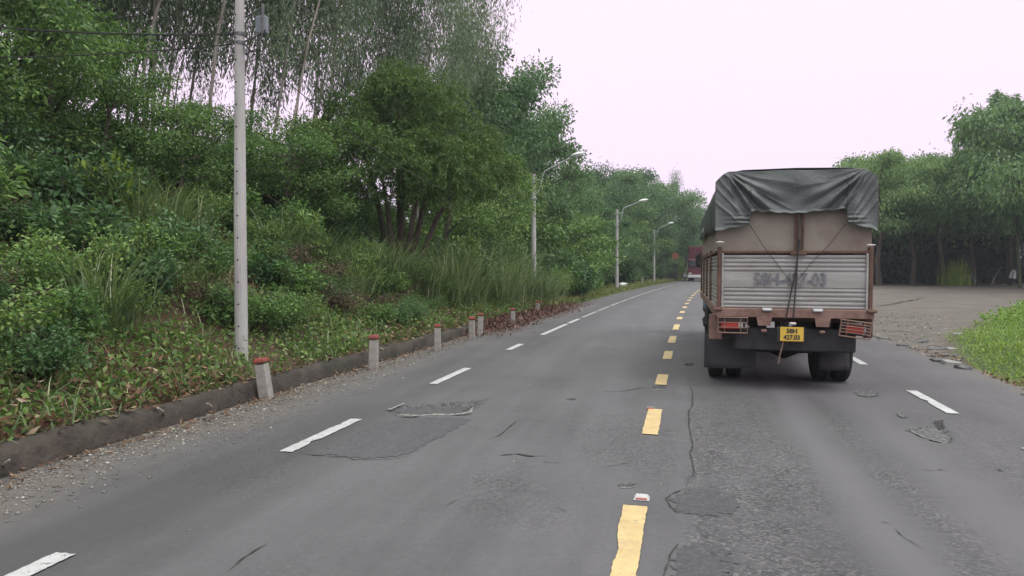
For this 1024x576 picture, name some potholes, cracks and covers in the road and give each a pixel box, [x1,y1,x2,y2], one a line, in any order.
pothole [906,420,953,444]
pothole [387,402,482,417]
